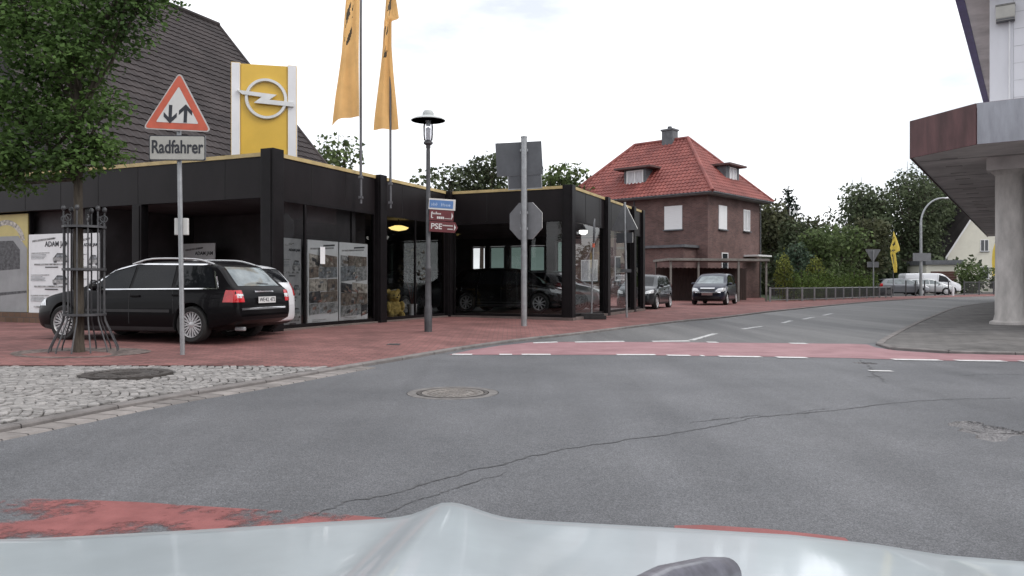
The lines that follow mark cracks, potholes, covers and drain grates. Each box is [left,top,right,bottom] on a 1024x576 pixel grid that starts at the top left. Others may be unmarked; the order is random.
manhole cover [79,368,172,381]
pothole [947,421,1024,442]
manhole cover [407,386,498,400]
crack [299,398,995,519]
